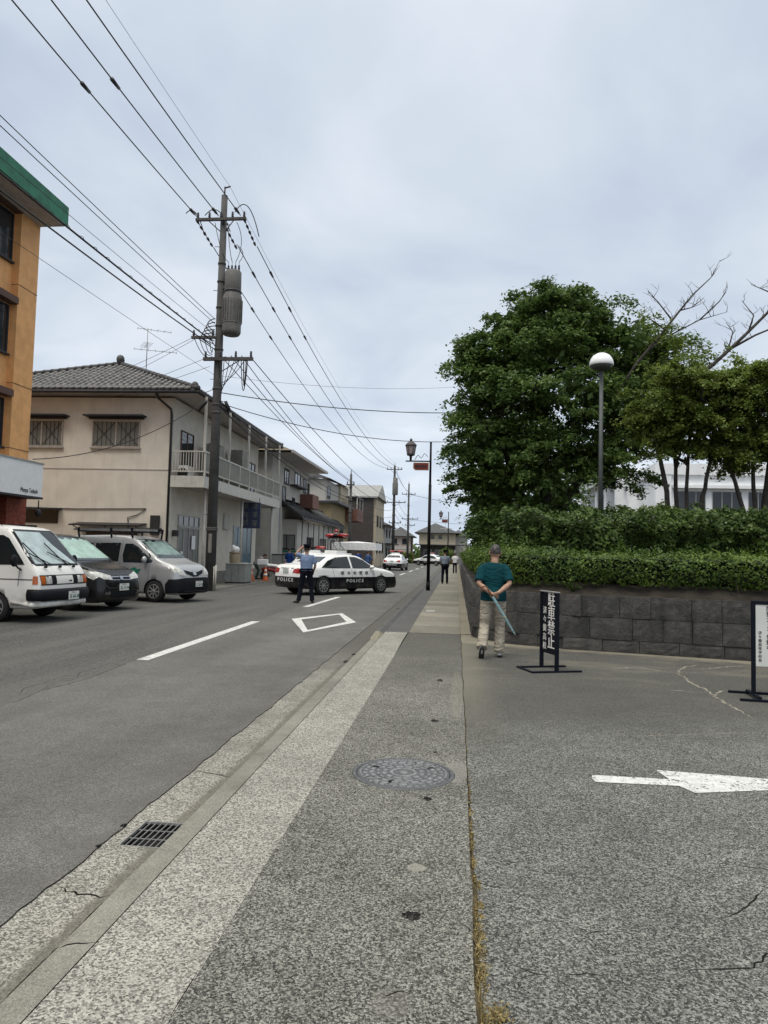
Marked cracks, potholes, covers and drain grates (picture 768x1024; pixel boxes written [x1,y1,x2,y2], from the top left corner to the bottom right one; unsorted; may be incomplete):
crack [722,889,763,918]
crack [1,887,109,1003]
crack [628,664,750,717]
manhole cover [352,758,455,790]
crack [687,953,768,971]
drain grate [118,821,184,848]
